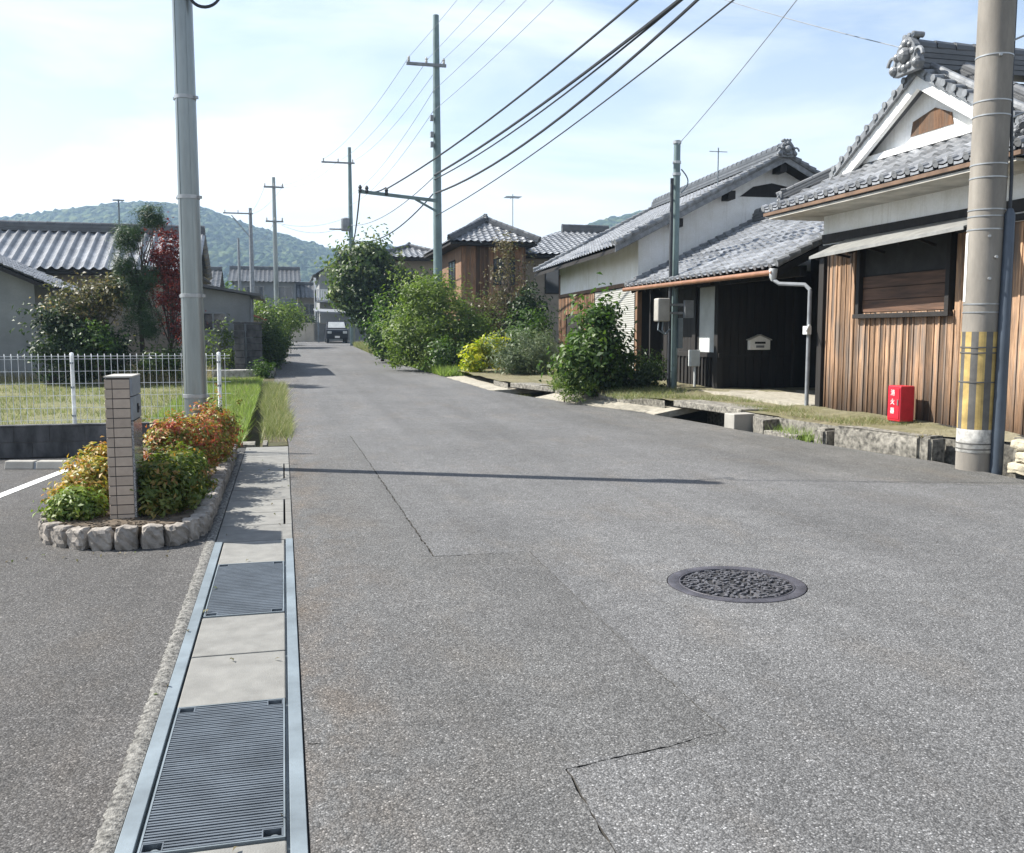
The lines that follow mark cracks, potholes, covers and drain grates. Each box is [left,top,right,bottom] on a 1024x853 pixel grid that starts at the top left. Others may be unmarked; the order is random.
manhole cover [667,566,807,603]
drain grate [137,698,286,853]
drain grate [203,561,284,618]
